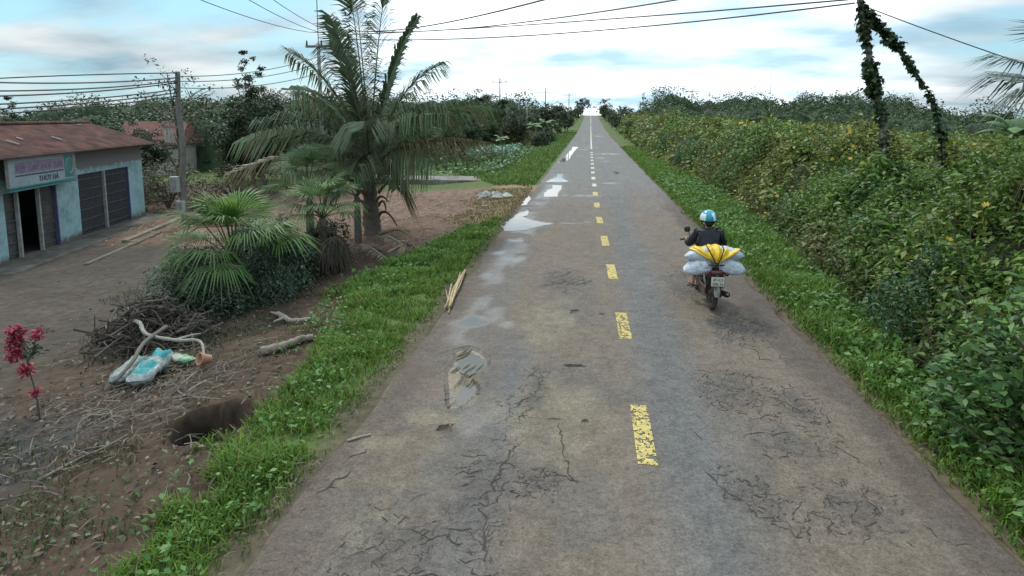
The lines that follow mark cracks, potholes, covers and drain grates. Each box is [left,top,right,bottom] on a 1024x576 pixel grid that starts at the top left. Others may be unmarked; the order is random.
crack [327,366,587,576]
pothole [437,343,498,413]
crack [301,449,367,512]
pothole [427,420,461,438]
crack [700,311,968,549]
